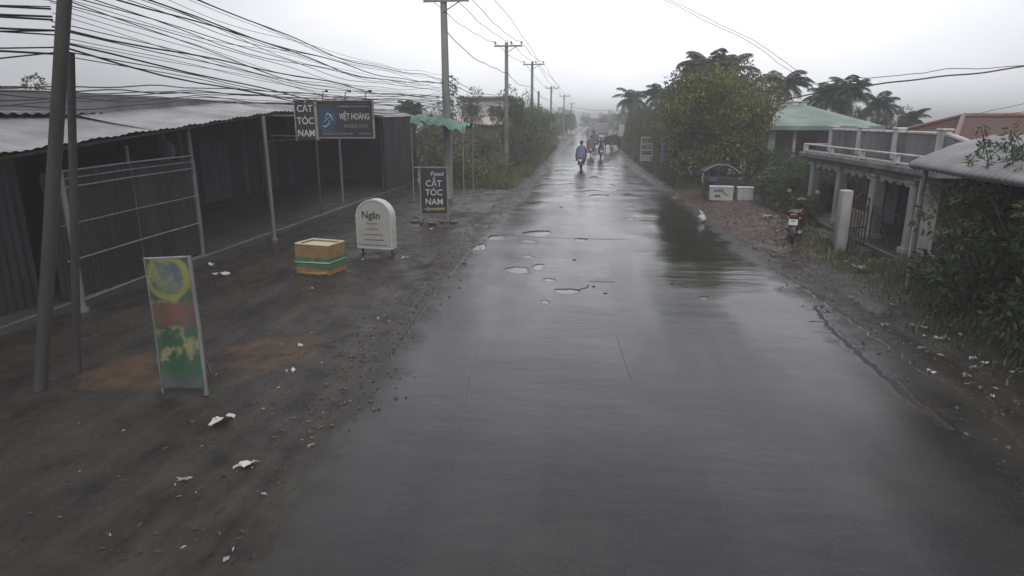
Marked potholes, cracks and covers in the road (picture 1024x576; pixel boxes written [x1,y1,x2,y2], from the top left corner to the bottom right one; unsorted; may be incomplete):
pothole [502,266,531,274]
